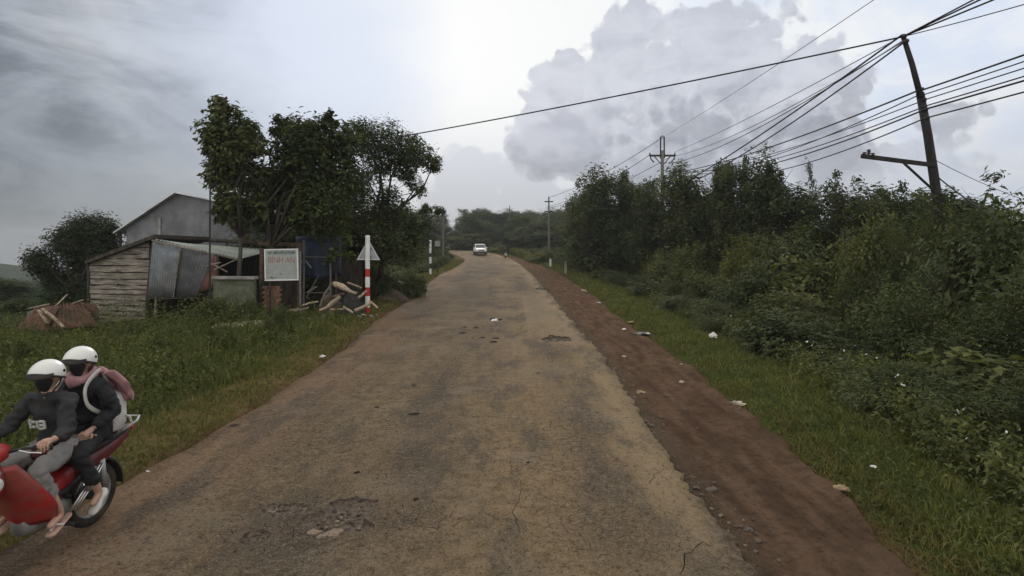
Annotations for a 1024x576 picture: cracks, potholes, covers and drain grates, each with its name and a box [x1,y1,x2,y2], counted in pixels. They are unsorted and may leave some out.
crack [484,413,704,575]
pothole [297,496,378,538]
